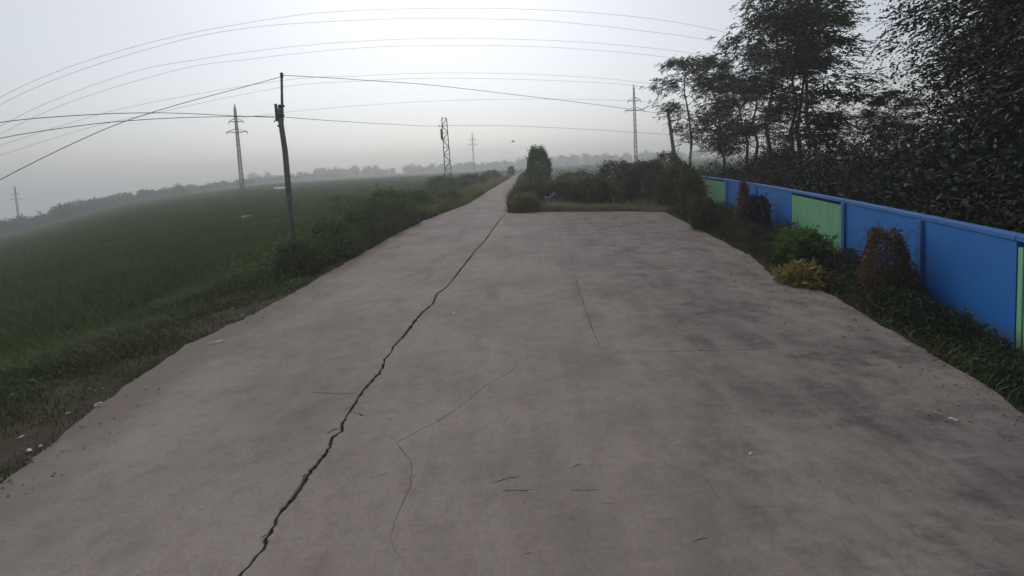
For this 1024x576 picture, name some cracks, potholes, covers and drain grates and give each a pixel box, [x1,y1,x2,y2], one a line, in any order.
crack [238,215,533,576]
crack [575,277,766,353]
